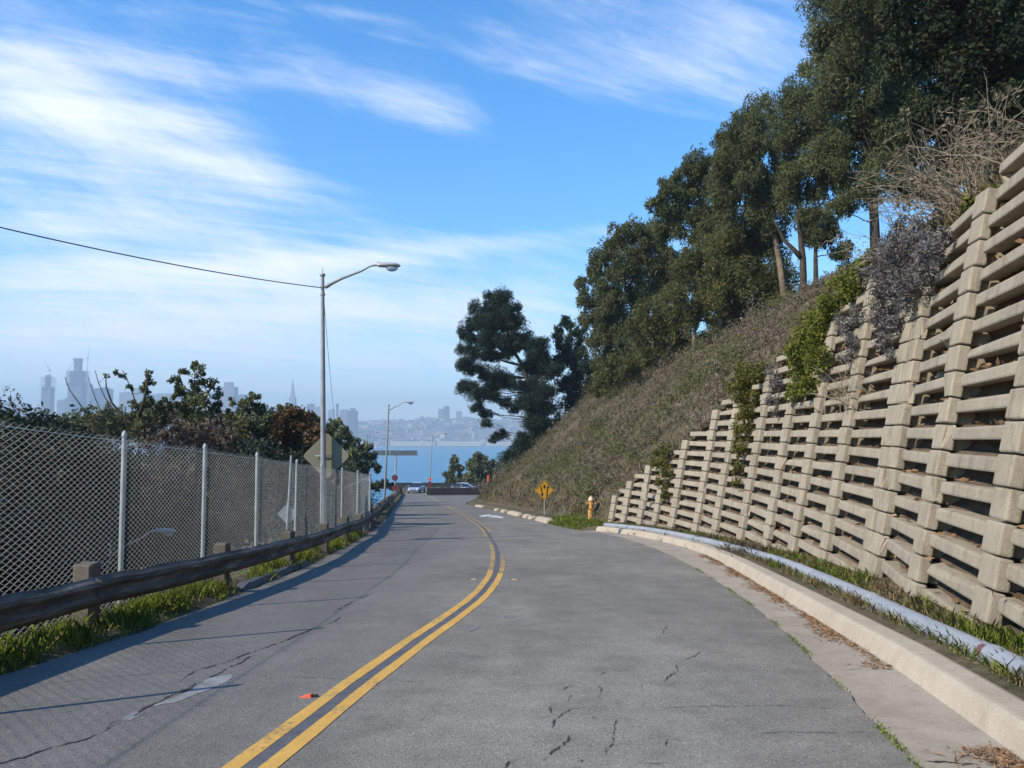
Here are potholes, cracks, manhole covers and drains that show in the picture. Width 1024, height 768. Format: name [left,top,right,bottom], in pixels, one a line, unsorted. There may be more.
crack [505,673,671,768]
crack [0,592,374,763]
